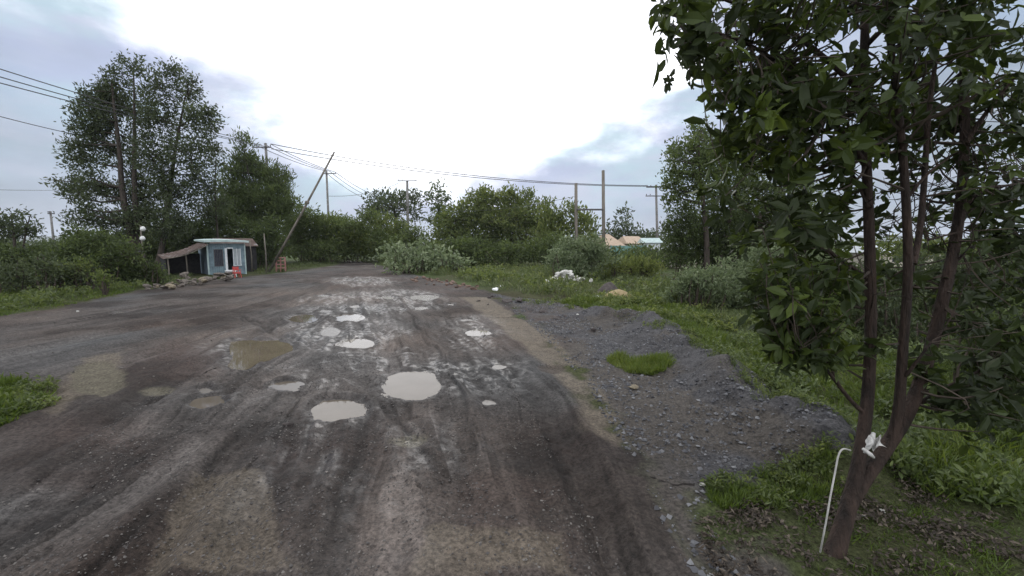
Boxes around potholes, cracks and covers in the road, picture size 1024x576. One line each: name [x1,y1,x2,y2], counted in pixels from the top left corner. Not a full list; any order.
pothole [381,371,441,401]
pothole [310,399,367,422]
pothole [335,339,375,348]
pothole [336,314,365,322]
pothole [268,381,305,392]
pothole [189,396,224,409]
pothole [228,340,293,370]
pothole [319,328,341,337]
pothole [142,387,175,396]
pothole [72,361,126,398]
pothole [289,314,318,323]
